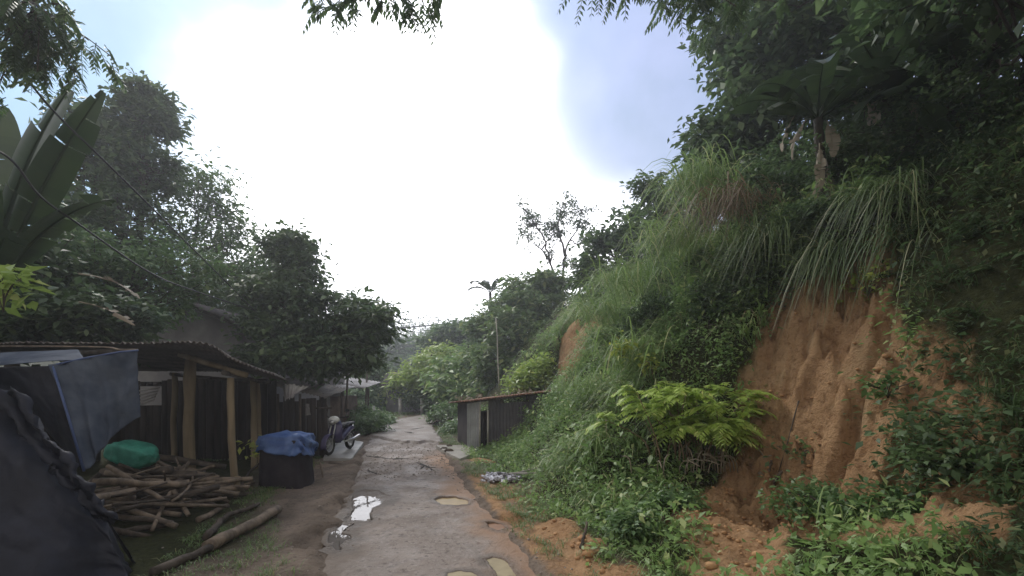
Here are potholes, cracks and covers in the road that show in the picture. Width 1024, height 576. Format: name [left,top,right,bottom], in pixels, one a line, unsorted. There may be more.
pothole [321,522,356,552]
pothole [483,555,519,576]
pothole [431,496,471,506]
pothole [346,489,393,525]
